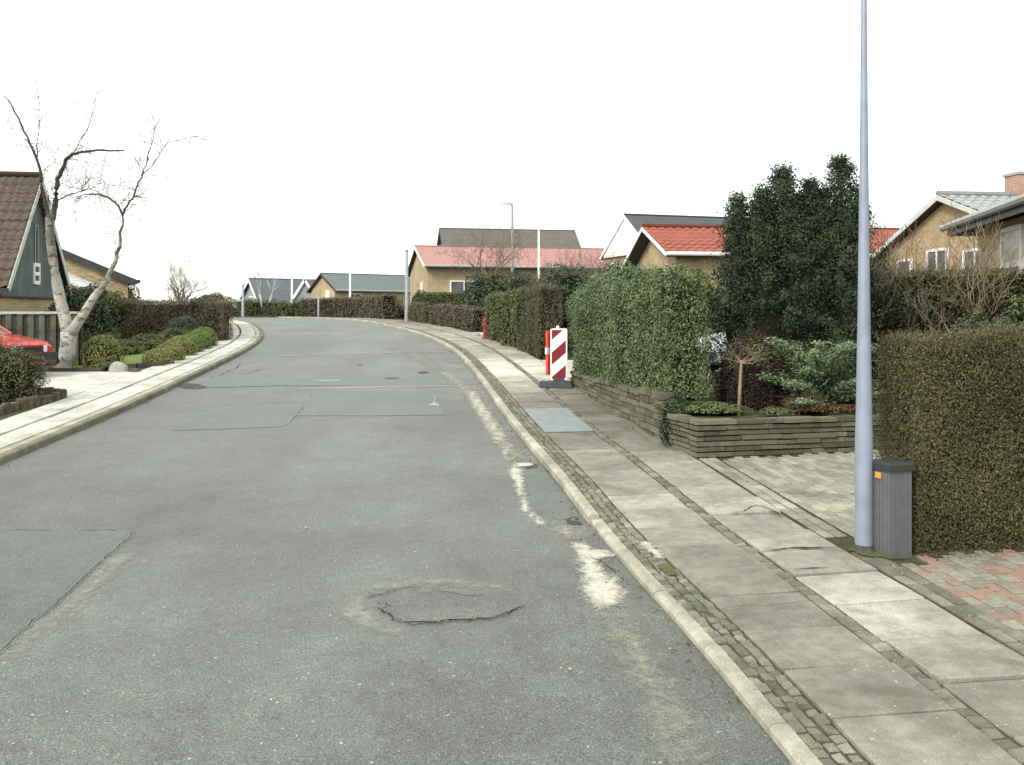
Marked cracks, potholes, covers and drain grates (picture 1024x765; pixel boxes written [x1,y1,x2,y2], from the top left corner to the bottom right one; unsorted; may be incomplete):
crack [210,363,351,405]
crack [596,559,630,584]
